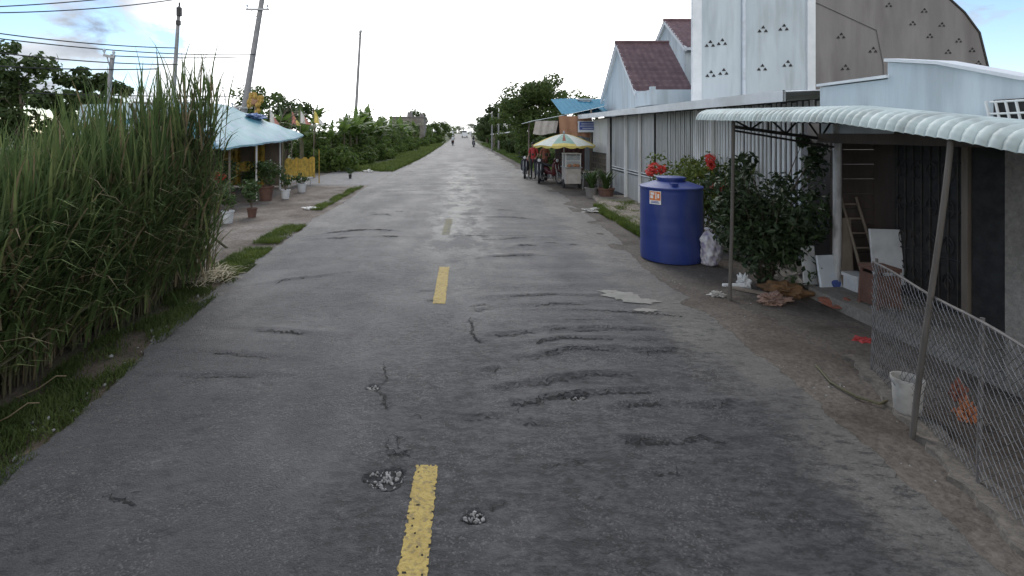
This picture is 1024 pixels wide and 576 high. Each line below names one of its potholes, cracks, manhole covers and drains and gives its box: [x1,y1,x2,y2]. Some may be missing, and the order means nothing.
pothole [461,510,486,525]
pothole [363,467,406,492]
crack [464,368,729,426]
crack [625,434,725,446]
crack [468,292,683,360]
crack [326,211,402,240]
crack [102,490,144,507]
crack [377,362,391,409]
crack [180,352,273,386]
crack [377,435,413,457]
